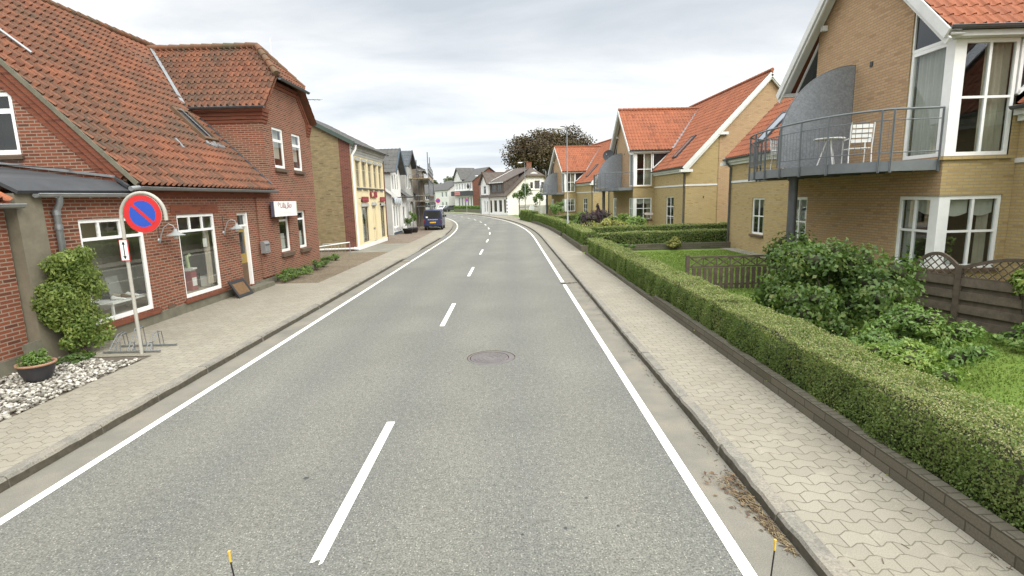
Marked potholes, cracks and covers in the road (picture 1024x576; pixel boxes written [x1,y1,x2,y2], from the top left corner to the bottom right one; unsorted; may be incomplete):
manhole cover [467,351,515,365]
